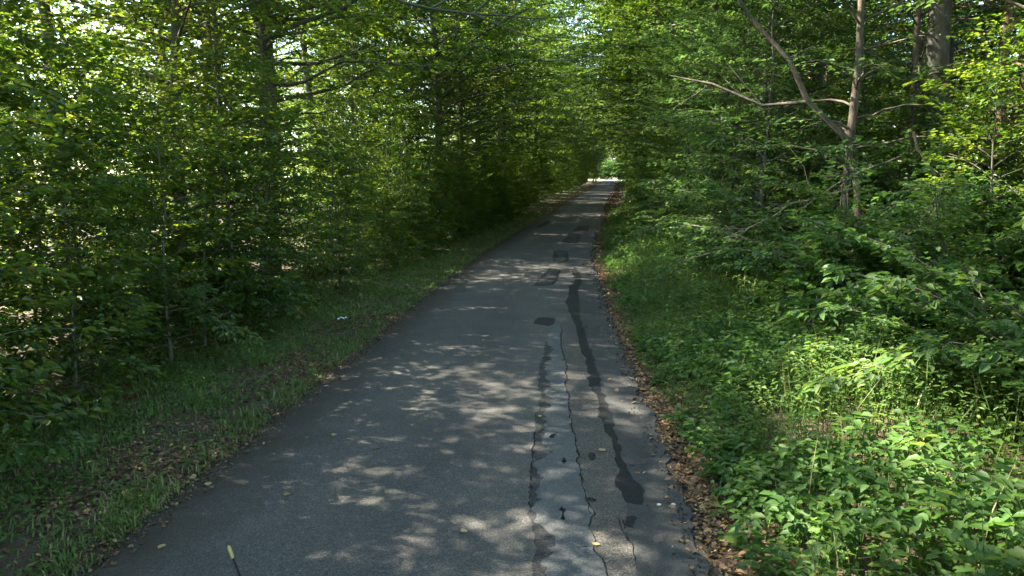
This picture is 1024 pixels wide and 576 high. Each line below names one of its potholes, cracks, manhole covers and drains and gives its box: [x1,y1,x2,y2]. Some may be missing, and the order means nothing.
crack [560,325,608,576]
